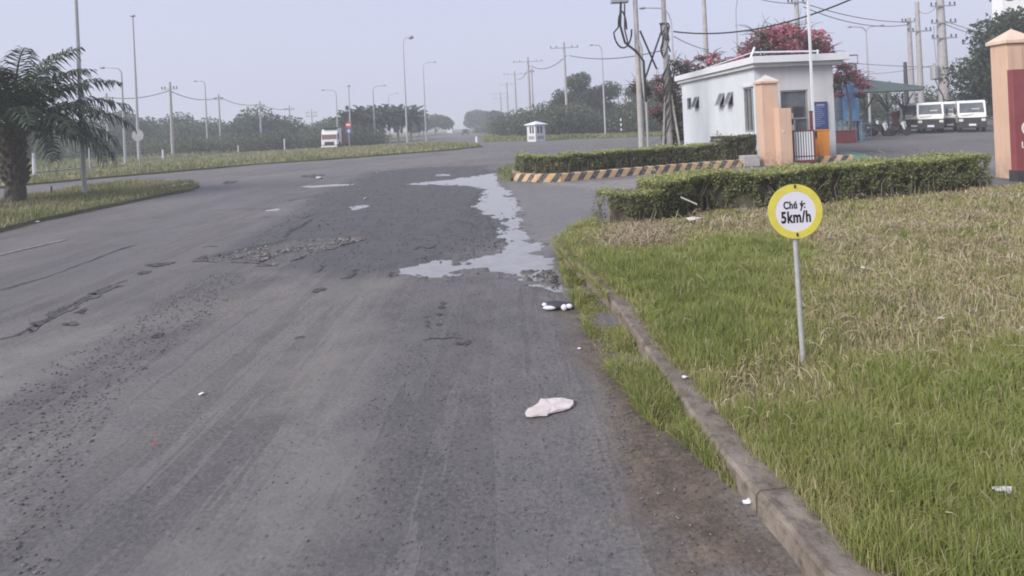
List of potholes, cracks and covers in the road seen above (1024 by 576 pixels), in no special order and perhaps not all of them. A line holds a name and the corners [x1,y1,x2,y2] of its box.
crack [2,244,137,290]
pothole [193,235,366,266]
pothole [27,284,123,332]
